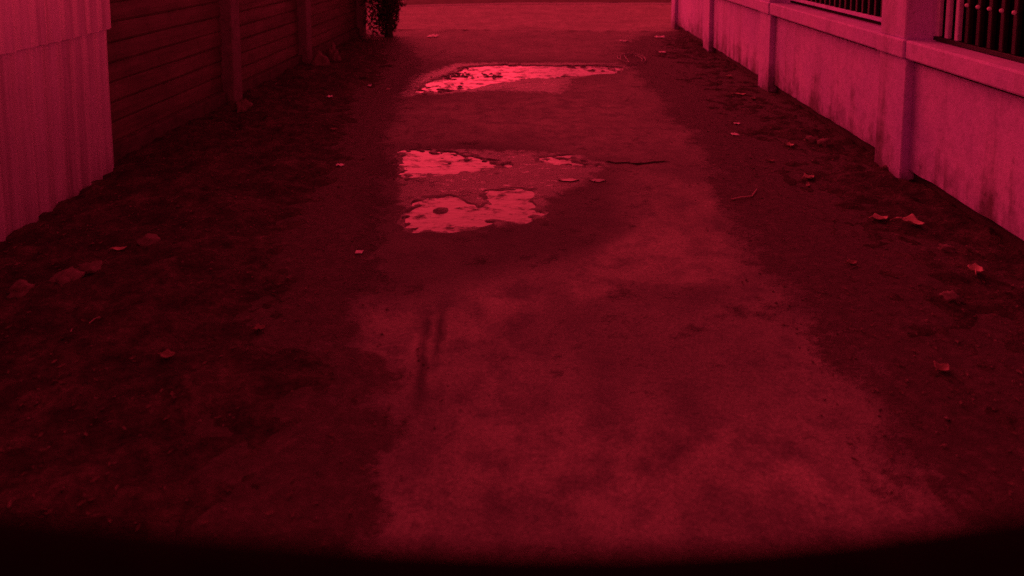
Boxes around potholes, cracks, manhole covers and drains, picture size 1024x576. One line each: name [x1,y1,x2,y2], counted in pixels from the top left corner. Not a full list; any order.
pothole [397,149,514,181]
pothole [531,153,607,168]
pothole [407,64,625,95]
pothole [396,187,549,233]
